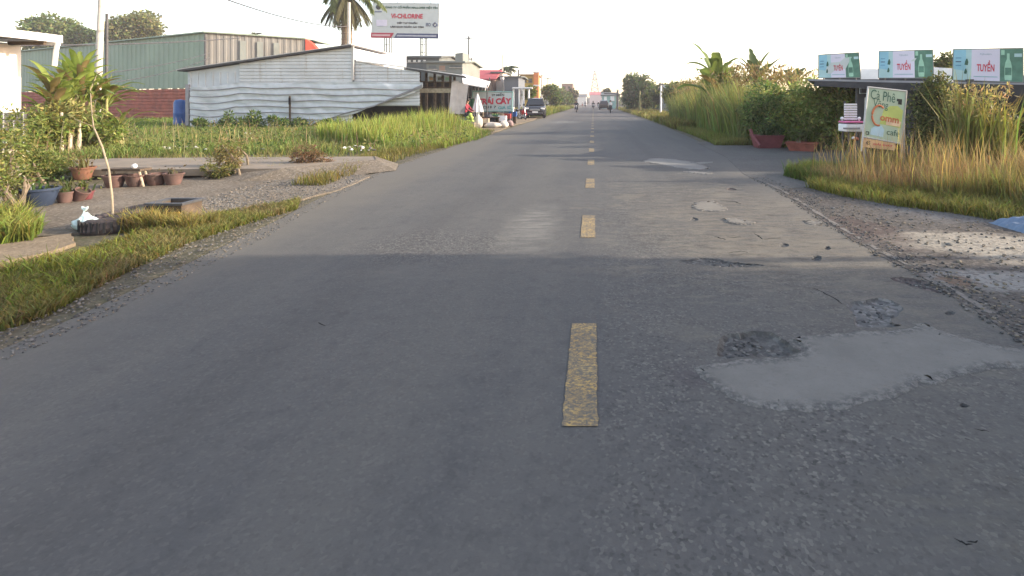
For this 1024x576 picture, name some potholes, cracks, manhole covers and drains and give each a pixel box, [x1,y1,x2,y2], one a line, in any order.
pothole [680,258,765,267]
pothole [716,331,801,359]
pothole [846,298,904,328]
